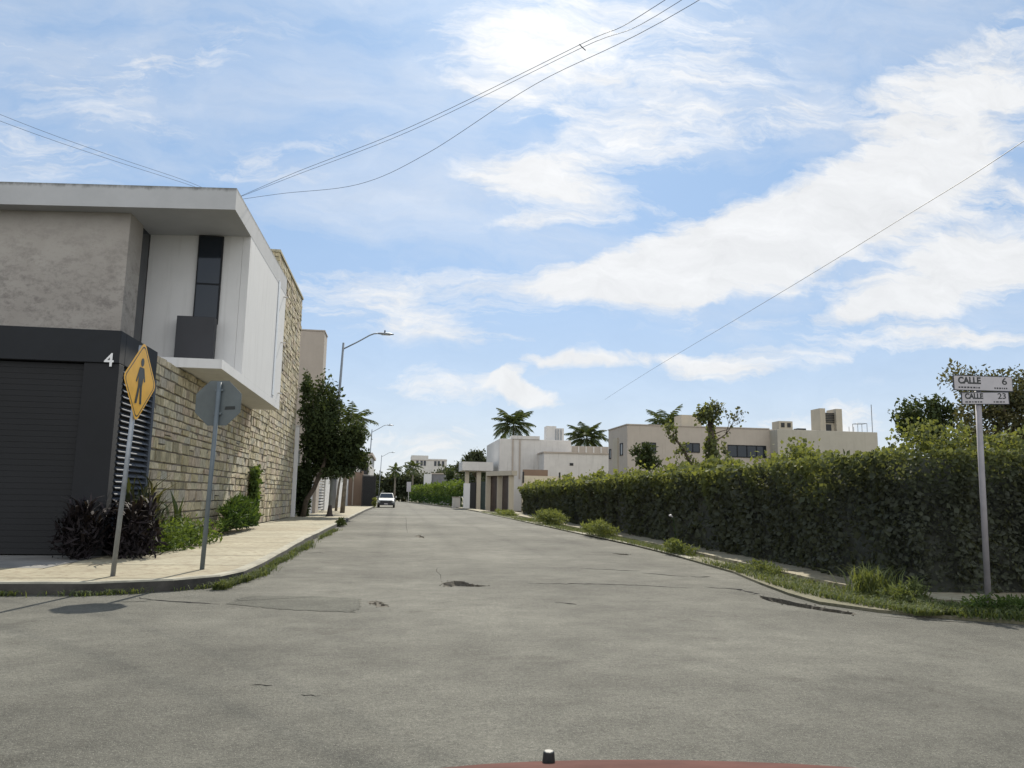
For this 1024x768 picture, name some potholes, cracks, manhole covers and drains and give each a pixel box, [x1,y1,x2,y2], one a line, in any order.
crack [530,569,758,594]
pothole [760,595,857,616]
